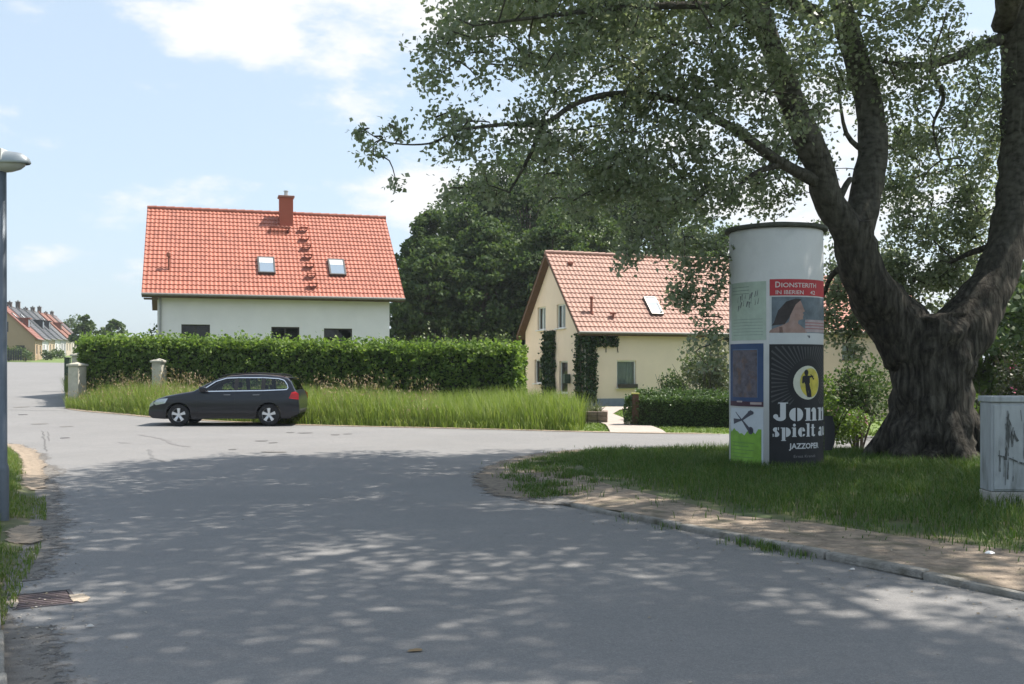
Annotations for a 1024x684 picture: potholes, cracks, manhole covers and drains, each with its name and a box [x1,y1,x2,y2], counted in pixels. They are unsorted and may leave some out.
drain grate [7,589,80,610]
crack [118,434,190,462]
